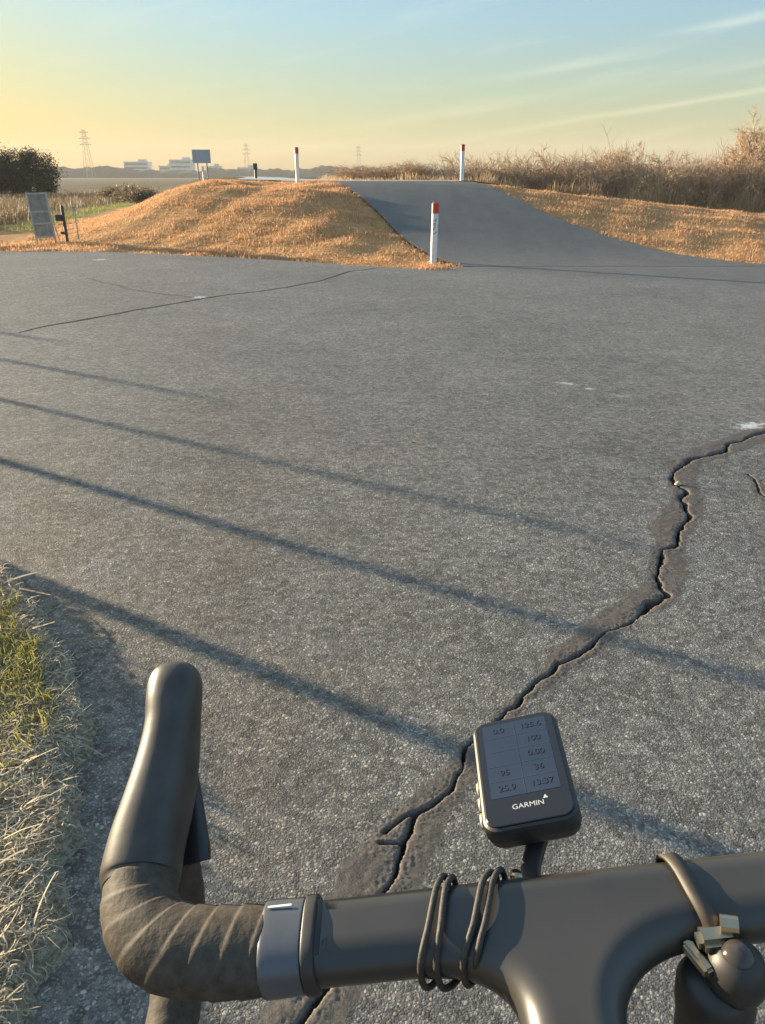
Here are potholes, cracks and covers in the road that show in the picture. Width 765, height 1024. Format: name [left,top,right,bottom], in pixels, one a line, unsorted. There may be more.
crack [239,423,765,1024]
crack [18,267,384,333]
